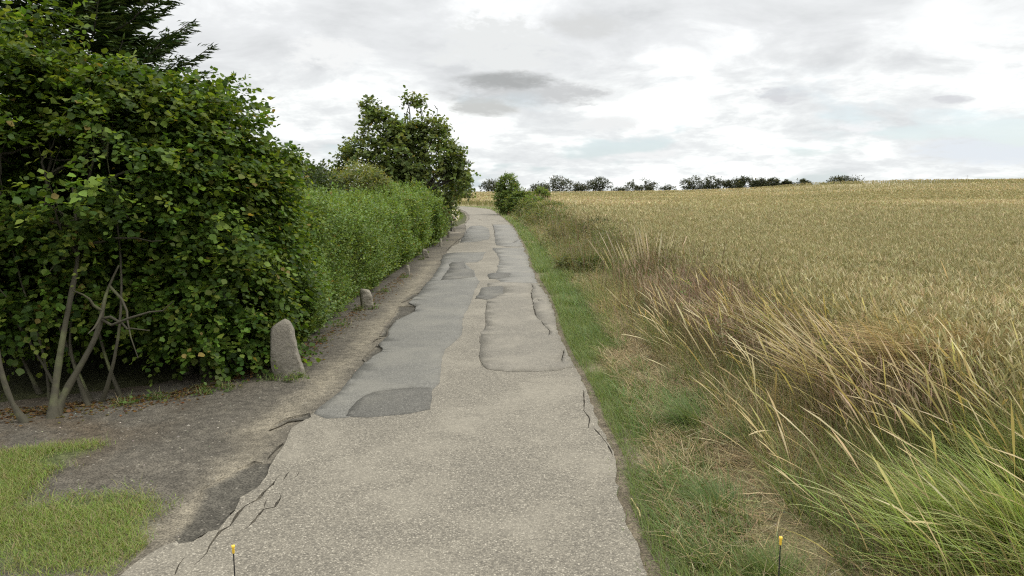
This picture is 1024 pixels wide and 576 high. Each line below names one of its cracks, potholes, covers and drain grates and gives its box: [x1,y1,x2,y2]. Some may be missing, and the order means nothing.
crack [175,443,299,574]
pothole [173,461,270,543]
crack [583,390,613,456]
